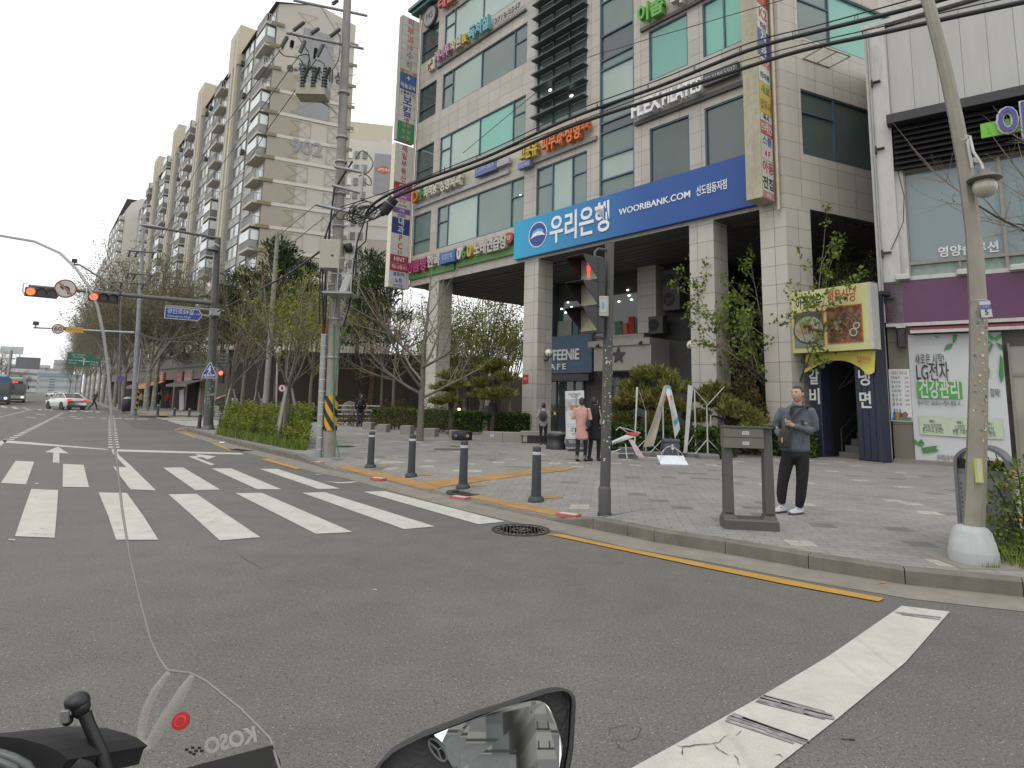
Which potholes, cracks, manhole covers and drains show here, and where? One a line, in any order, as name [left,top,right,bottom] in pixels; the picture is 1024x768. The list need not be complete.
manhole cover [492,524,550,537]
crack [676,731,781,765]
